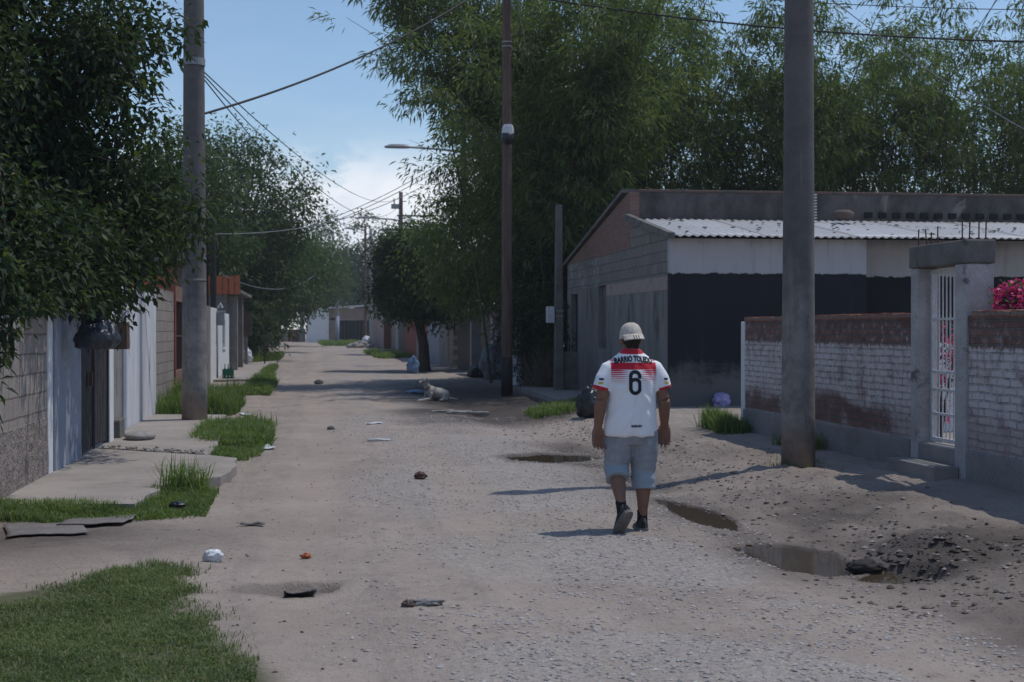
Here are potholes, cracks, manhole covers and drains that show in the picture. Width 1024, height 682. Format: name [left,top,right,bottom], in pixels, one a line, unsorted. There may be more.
pothole [649,498,752,534]
pothole [237,582,345,598]
pothole [725,542,898,584]
pothole [854,560,958,584]
pothole [499,452,604,463]
